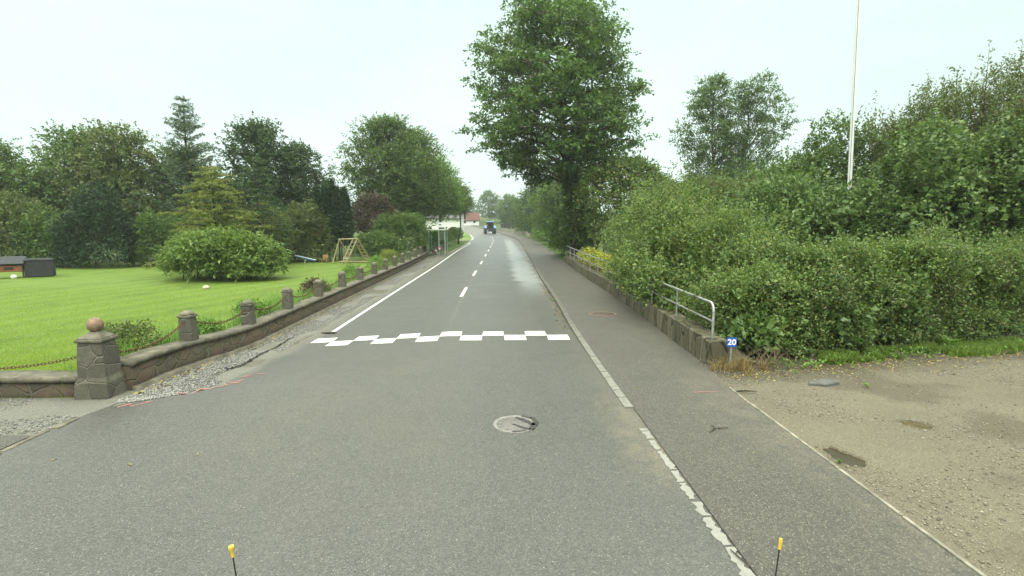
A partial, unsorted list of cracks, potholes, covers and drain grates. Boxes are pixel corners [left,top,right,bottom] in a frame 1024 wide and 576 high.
pothole [818,443,871,470]
pothole [893,418,938,431]
manhole cover [493,415,538,433]
